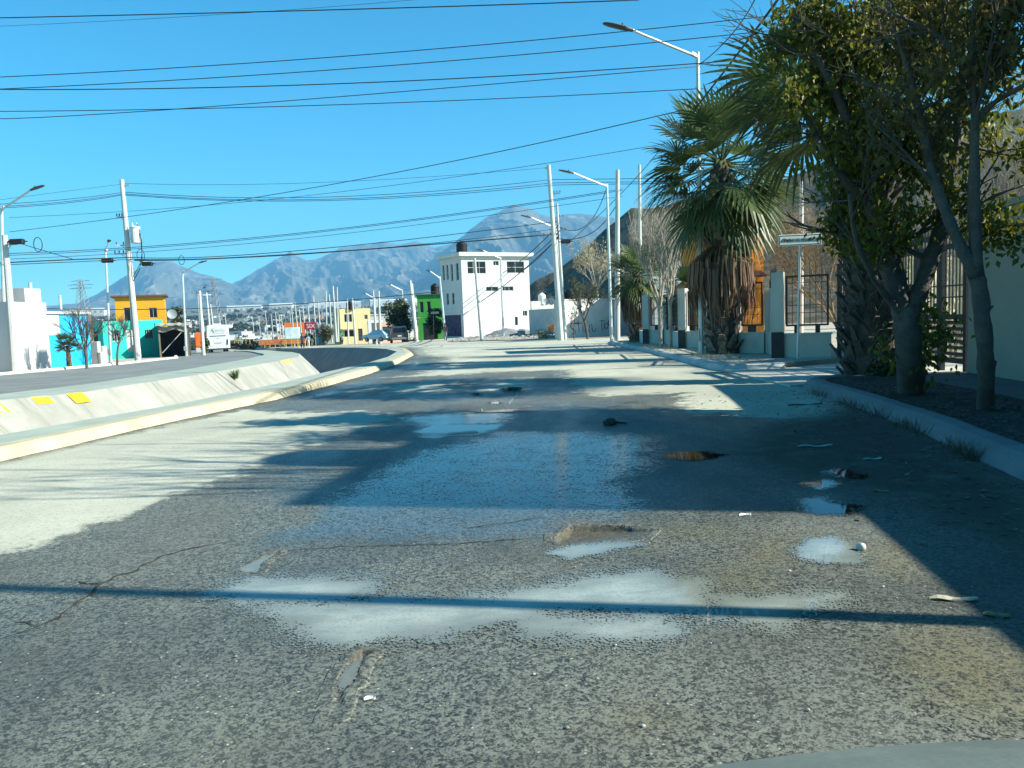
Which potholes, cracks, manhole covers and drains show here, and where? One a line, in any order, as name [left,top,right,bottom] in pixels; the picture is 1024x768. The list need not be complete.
crack [289,516,545,551]
pothole [543,523,661,546]
crack [0,541,231,639]
pothole [312,645,386,727]
